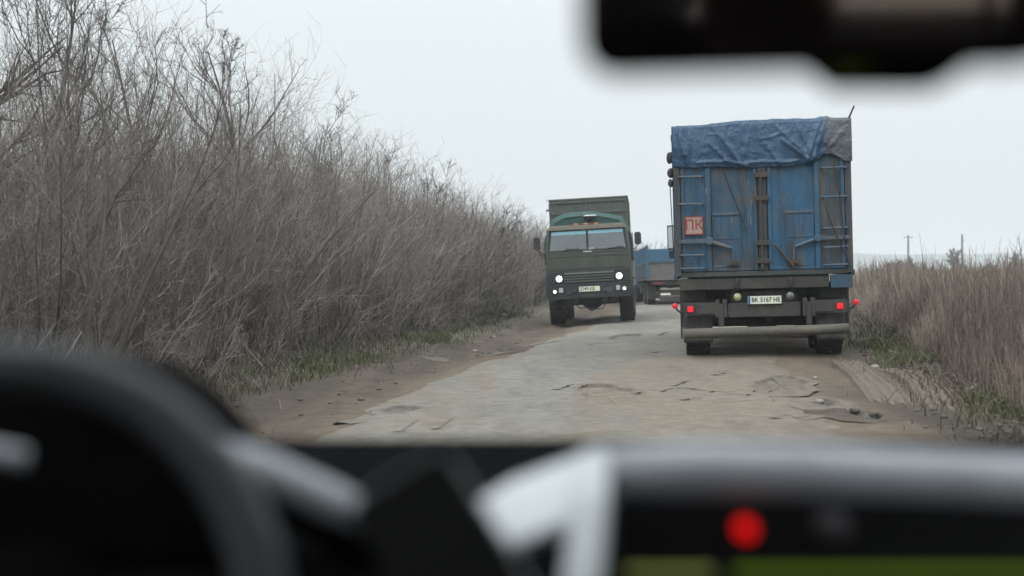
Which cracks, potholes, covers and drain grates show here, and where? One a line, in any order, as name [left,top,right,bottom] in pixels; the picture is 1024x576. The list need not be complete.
crack [336,417,461,432]
crack [633,370,826,420]
pothole [804,408,907,424]
pothole [368,405,430,415]
pothole [743,375,819,397]
